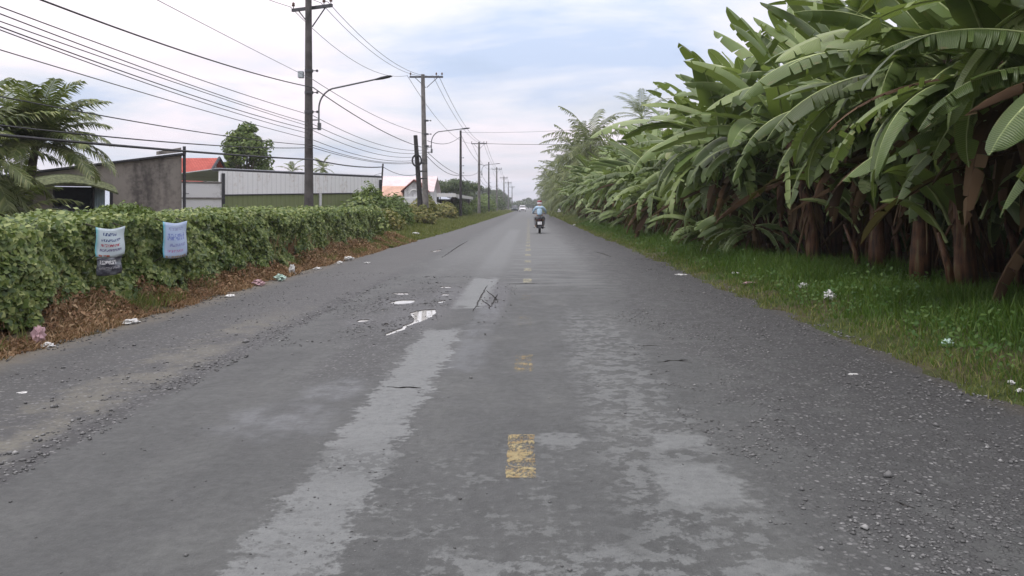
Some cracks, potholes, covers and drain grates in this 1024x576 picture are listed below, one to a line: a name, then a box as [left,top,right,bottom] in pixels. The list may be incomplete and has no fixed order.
crack [473,288,498,311]
pothole [385,309,436,336]
